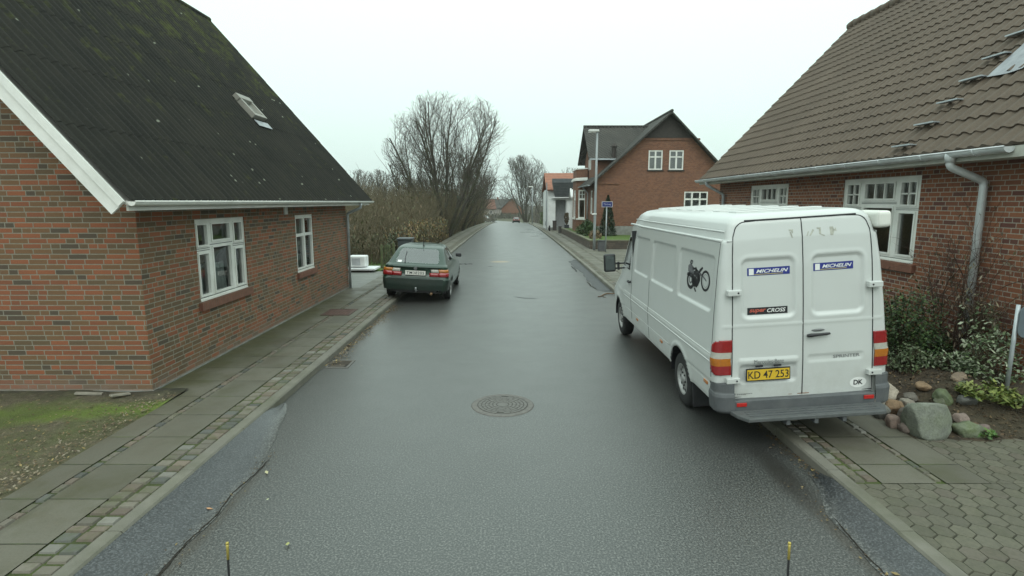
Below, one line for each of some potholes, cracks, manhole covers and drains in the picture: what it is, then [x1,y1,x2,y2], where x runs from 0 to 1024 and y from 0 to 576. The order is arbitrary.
drain grate [325,360,356,368]
manhole cover [471,394,534,417]
